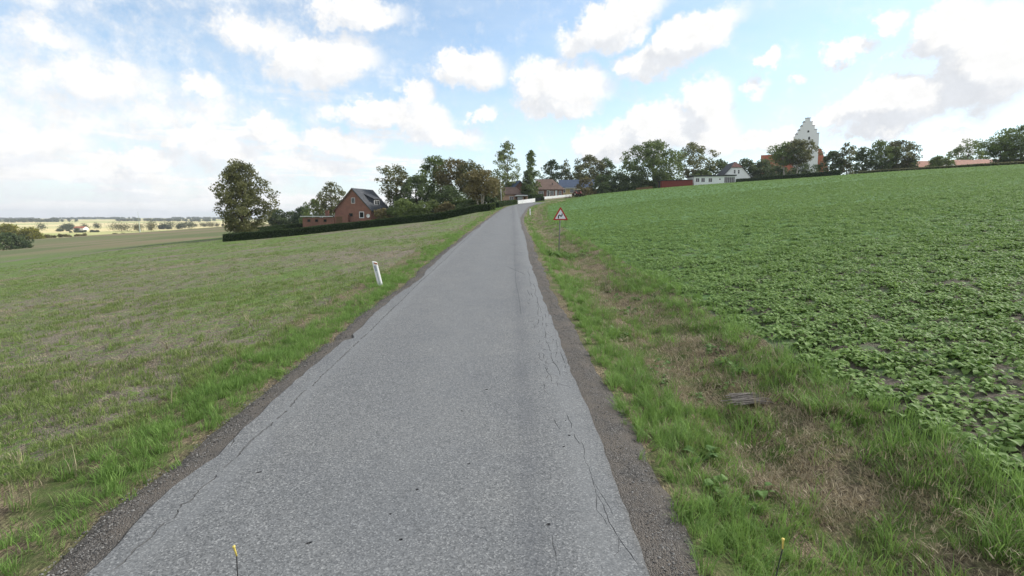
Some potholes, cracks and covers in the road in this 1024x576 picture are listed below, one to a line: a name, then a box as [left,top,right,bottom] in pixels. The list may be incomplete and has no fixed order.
crack [553,415,638,564]
crack [509,267,569,394]
